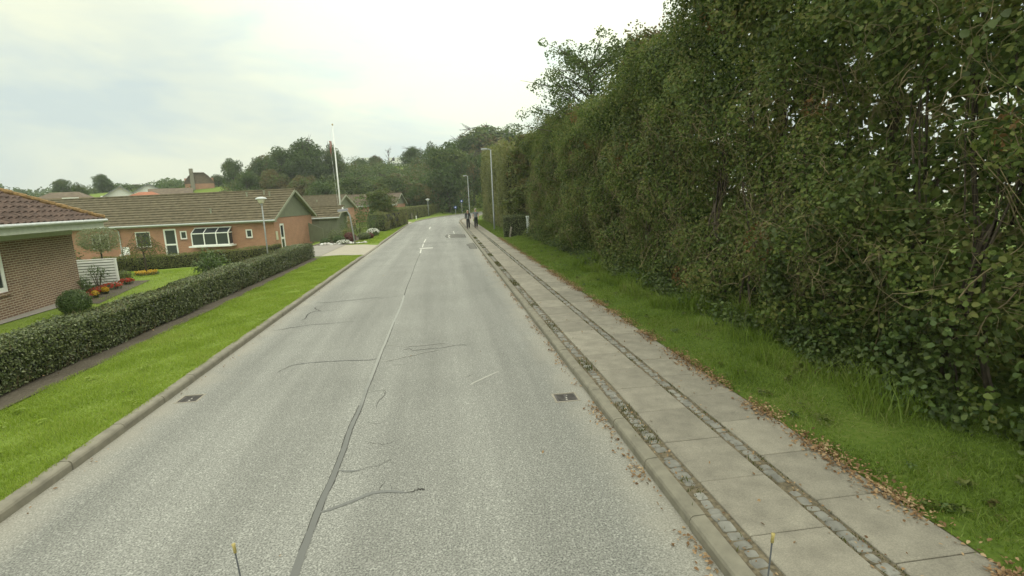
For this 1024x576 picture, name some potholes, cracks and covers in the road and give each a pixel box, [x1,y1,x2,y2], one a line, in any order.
drain grate [173,393,207,404]
drain grate [551,392,581,403]
